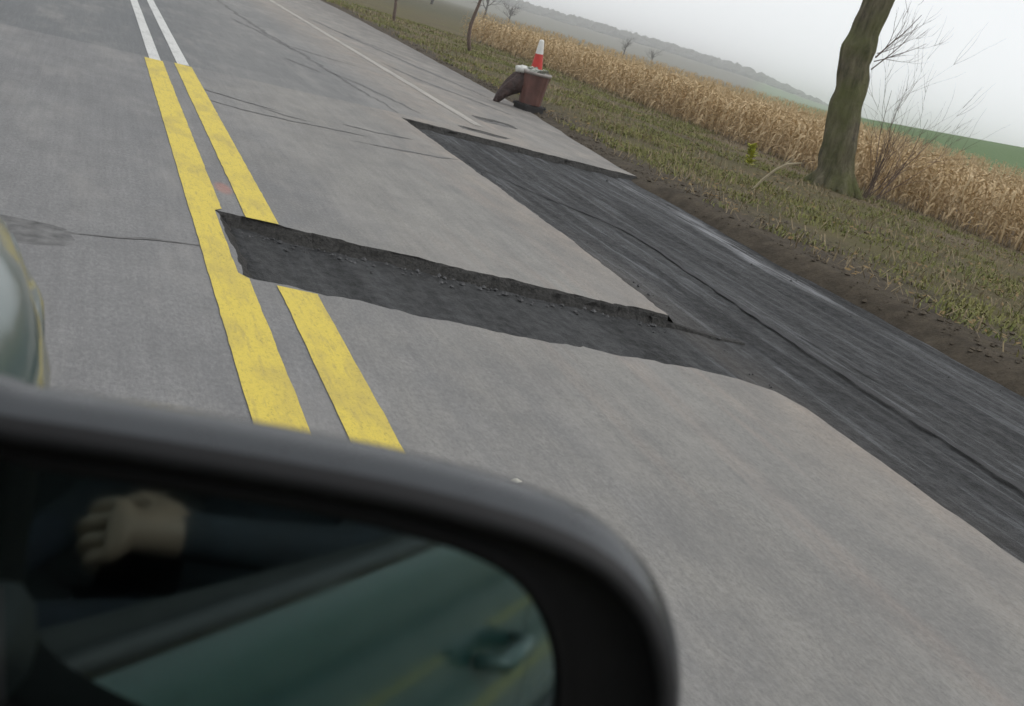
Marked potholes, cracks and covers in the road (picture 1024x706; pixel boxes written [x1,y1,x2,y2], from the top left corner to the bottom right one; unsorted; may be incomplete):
pothole [215,210,745,378]
pothole [403,118,1024,563]
crack [205,1,1024,492]
crack [74,233,197,245]
